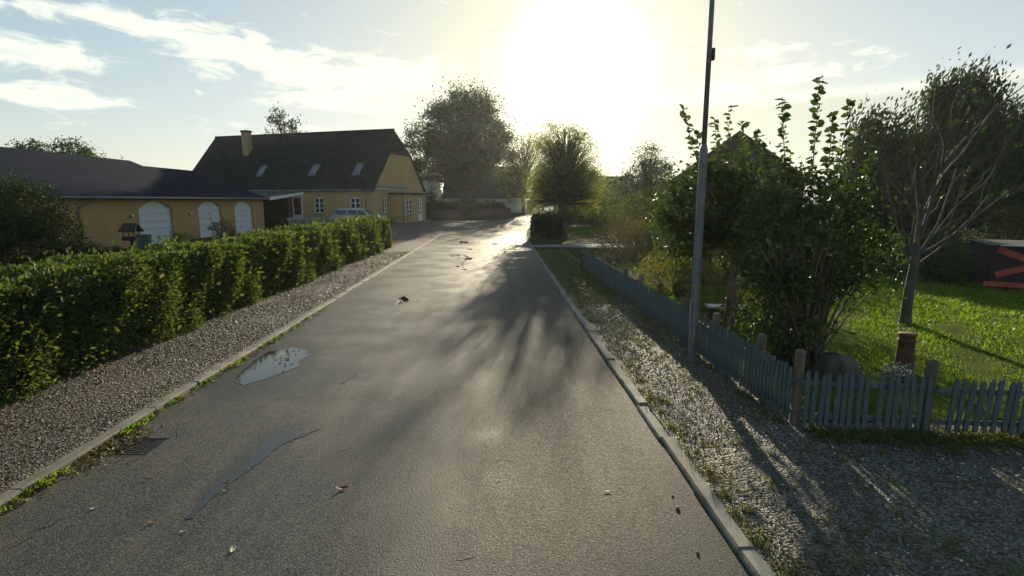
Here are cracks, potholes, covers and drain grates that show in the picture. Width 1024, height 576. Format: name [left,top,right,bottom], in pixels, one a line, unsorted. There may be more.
crack [6,516,70,551]
drain grate [103,438,170,465]
